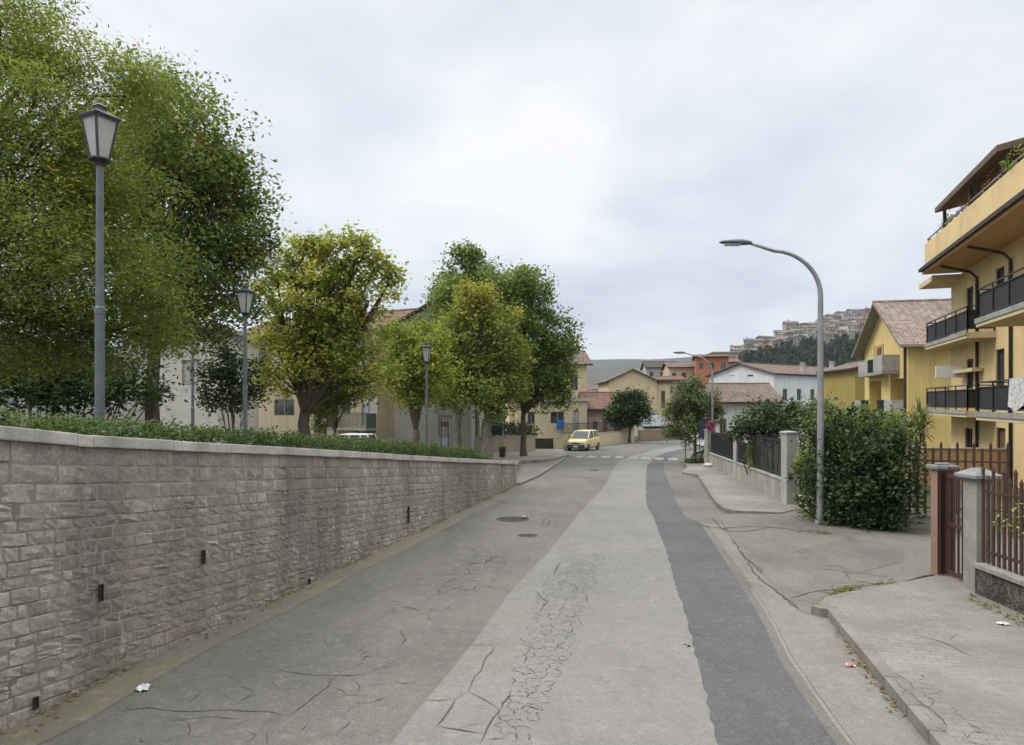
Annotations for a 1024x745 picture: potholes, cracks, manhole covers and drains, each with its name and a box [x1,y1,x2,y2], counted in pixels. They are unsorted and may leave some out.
crack [112,550,604,744]
crack [892,672,987,744]
crack [697,518,797,532]
crack [790,565,892,598]
